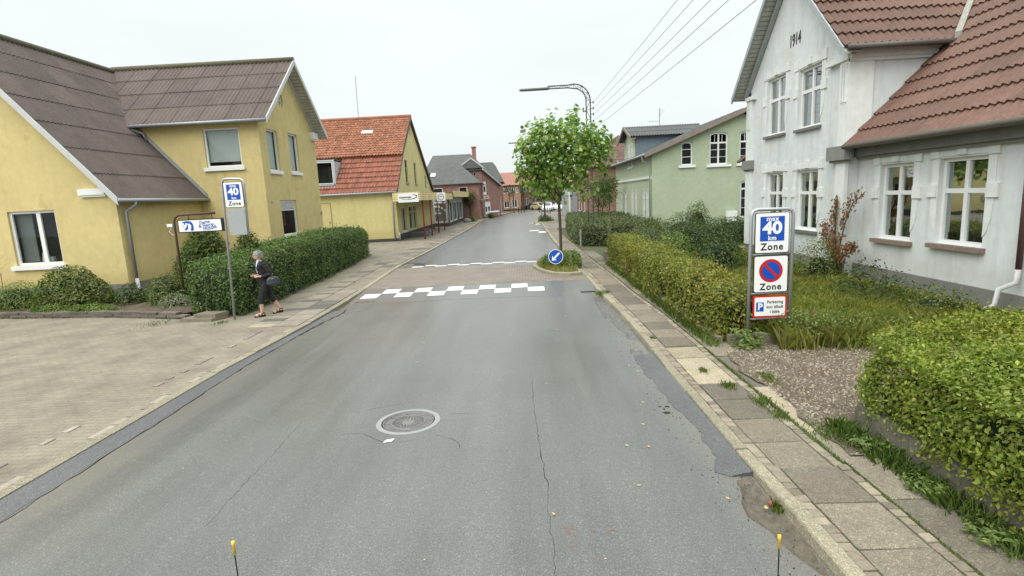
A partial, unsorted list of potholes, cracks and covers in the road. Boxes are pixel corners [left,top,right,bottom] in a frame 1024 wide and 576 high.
manhole cover [376,409,440,435]
crack [531,373,556,574]
pothole [737,478,830,576]
